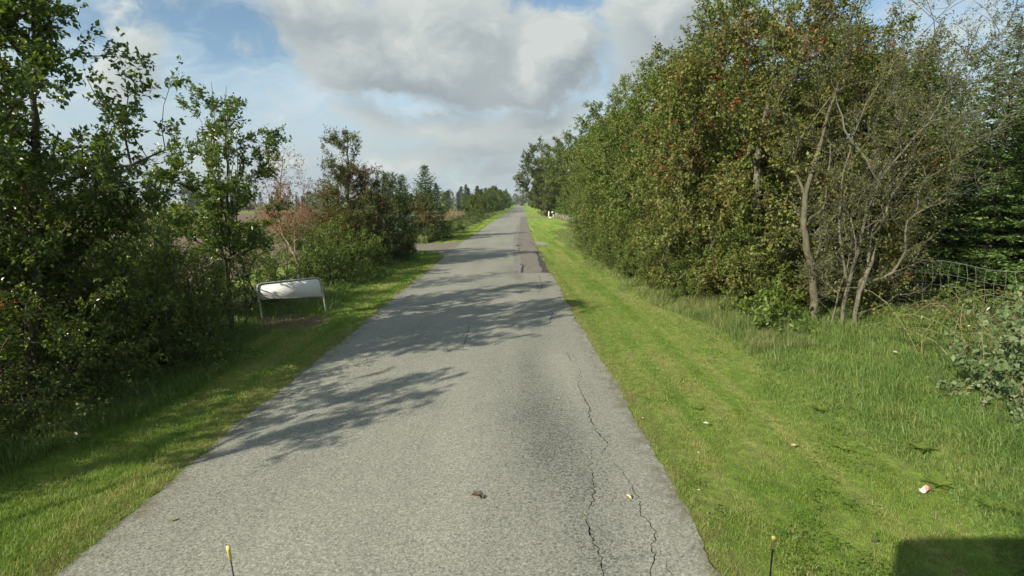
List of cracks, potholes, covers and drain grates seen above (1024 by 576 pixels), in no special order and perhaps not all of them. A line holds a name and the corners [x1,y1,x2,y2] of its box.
crack [567,354,672,576]
